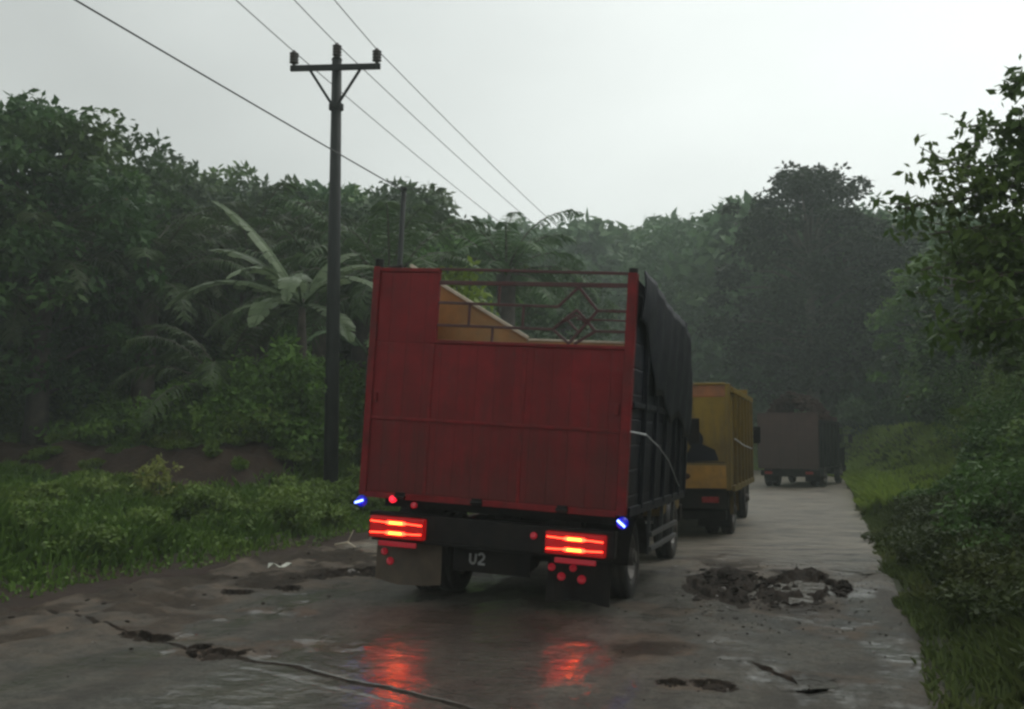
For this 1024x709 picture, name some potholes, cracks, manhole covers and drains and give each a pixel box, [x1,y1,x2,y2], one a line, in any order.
pothole [668,564,774,612]
pothole [829,577,869,602]
pothole [669,673,764,700]
pothole [176,644,278,665]
pothole [632,674,702,694]
pothole [750,566,849,611]
crack [0,604,522,709]
pothole [96,628,199,646]
crack [727,661,839,692]
